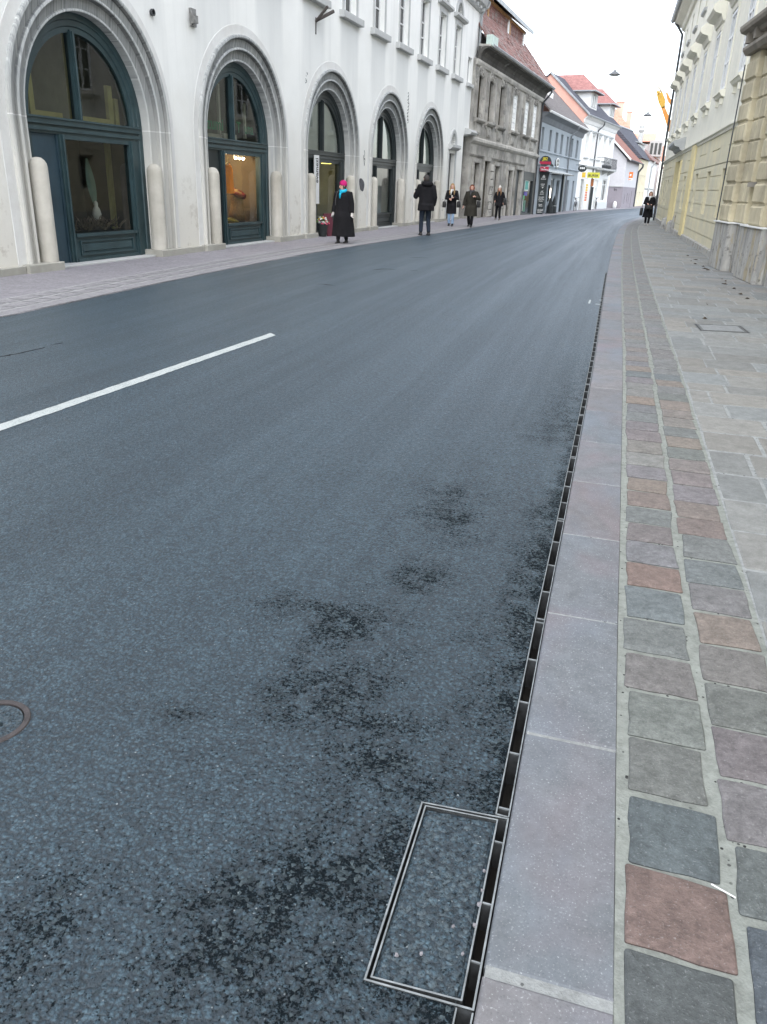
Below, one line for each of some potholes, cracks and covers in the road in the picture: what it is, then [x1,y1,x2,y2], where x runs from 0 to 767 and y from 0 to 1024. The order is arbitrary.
manhole cover [0,700,31,743]
manhole cover [363,801,509,1024]
manhole cover [694,324,750,333]
